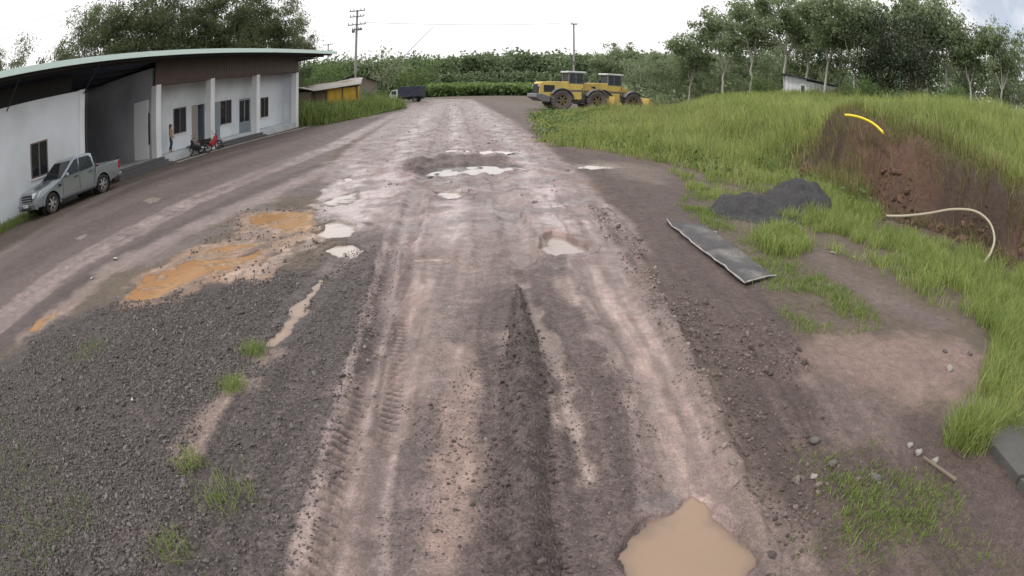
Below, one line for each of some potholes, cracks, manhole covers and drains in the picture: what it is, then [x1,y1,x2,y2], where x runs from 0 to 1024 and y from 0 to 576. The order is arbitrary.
pothole [312,240,375,263]
pothole [404,160,536,180]
pothole [305,218,369,242]
pothole [596,483,783,576]
pothole [524,227,601,259]
pothole [425,187,481,201]
